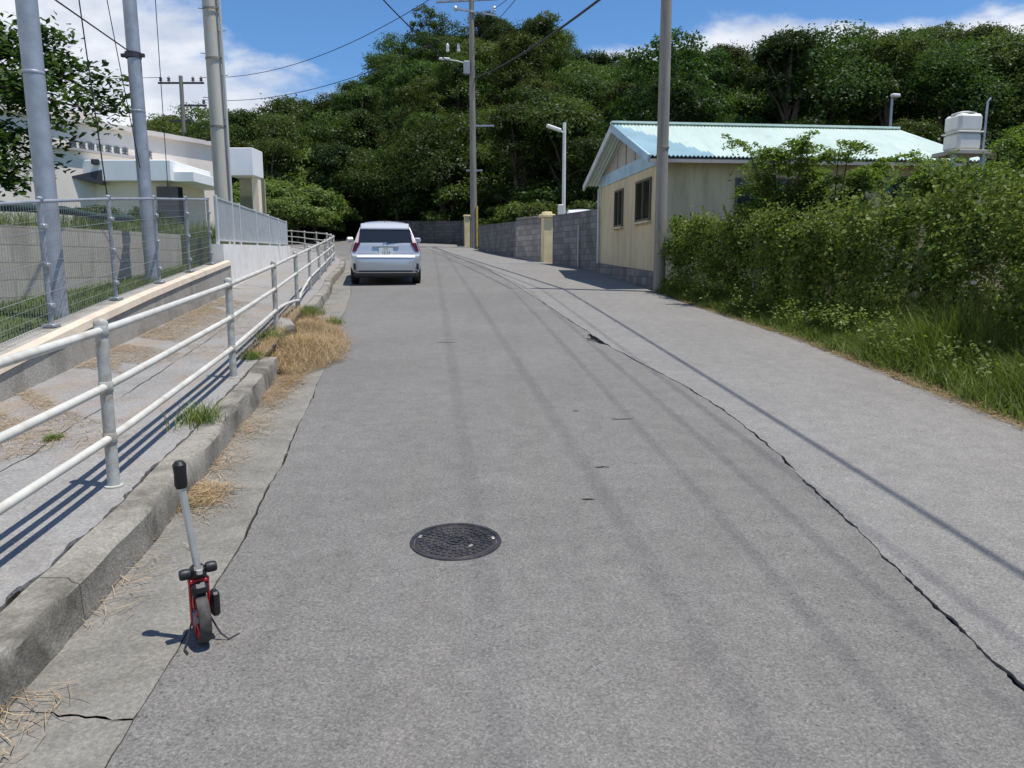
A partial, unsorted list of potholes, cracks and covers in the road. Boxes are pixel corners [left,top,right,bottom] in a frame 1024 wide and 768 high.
crack [568,319,1024,691]
manhole cover [410,523,501,561]
